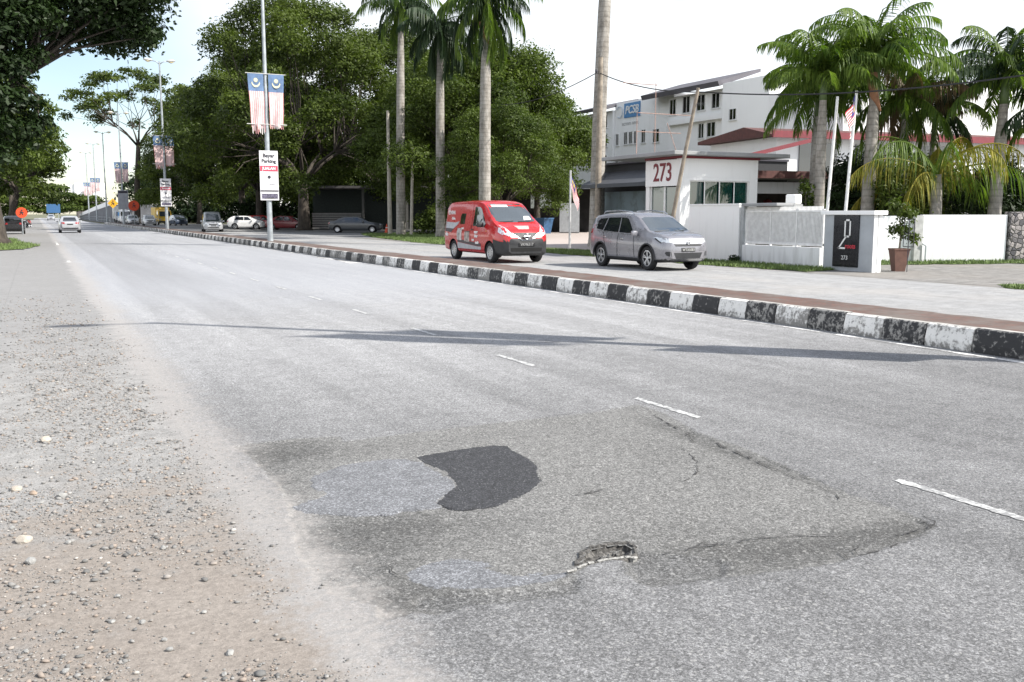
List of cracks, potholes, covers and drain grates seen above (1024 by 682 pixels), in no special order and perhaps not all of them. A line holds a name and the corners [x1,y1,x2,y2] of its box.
pothole [567,541,639,574]
crack [642,407,863,502]
